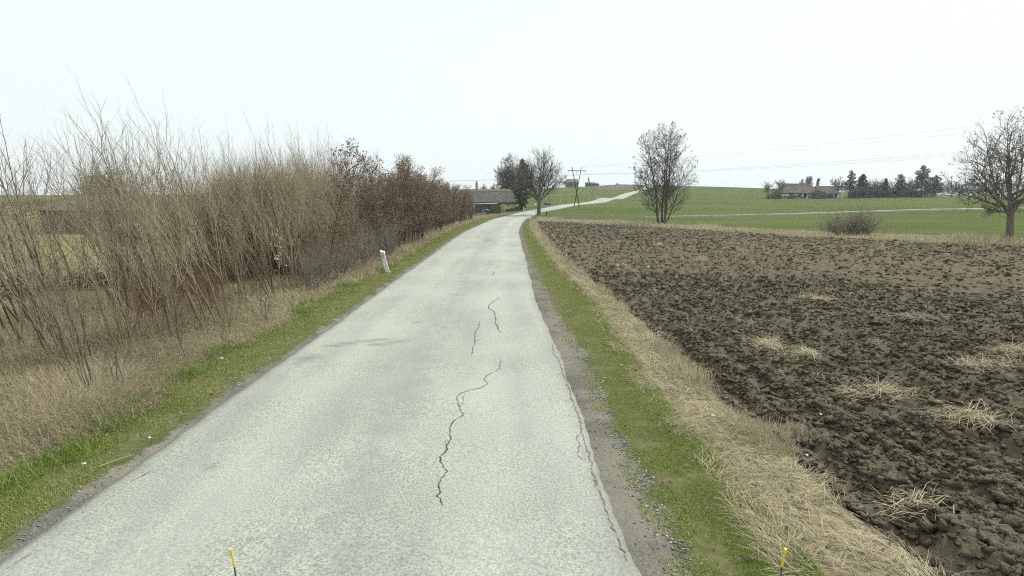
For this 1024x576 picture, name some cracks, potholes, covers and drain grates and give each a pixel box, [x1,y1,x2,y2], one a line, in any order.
crack [436,361,502,504]
crack [552,345,628,562]
